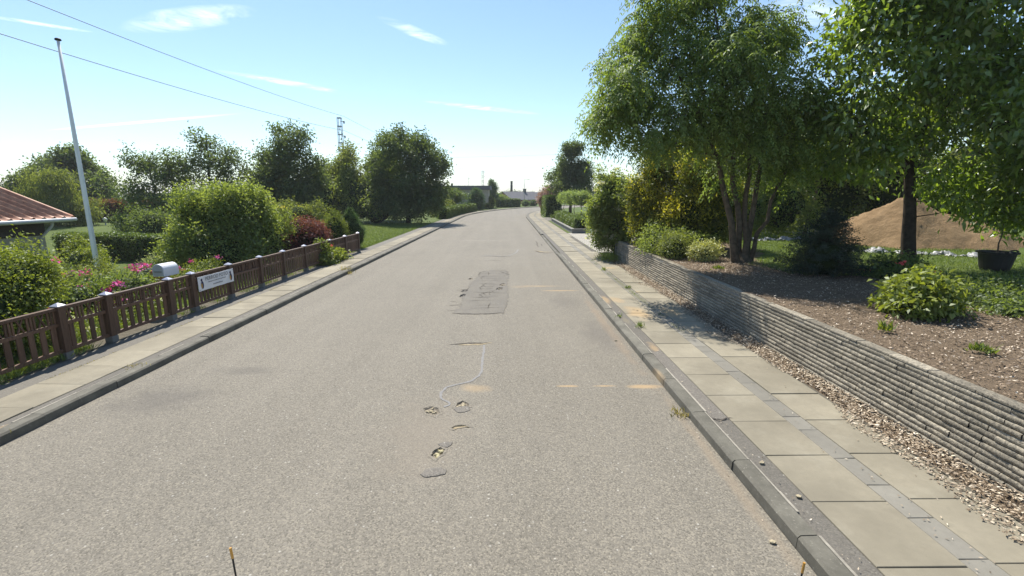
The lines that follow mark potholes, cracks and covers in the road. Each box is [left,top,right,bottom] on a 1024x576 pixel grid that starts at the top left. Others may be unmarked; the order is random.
pothole [420,405,444,418]
pothole [452,399,472,408]
pothole [428,446,448,462]
